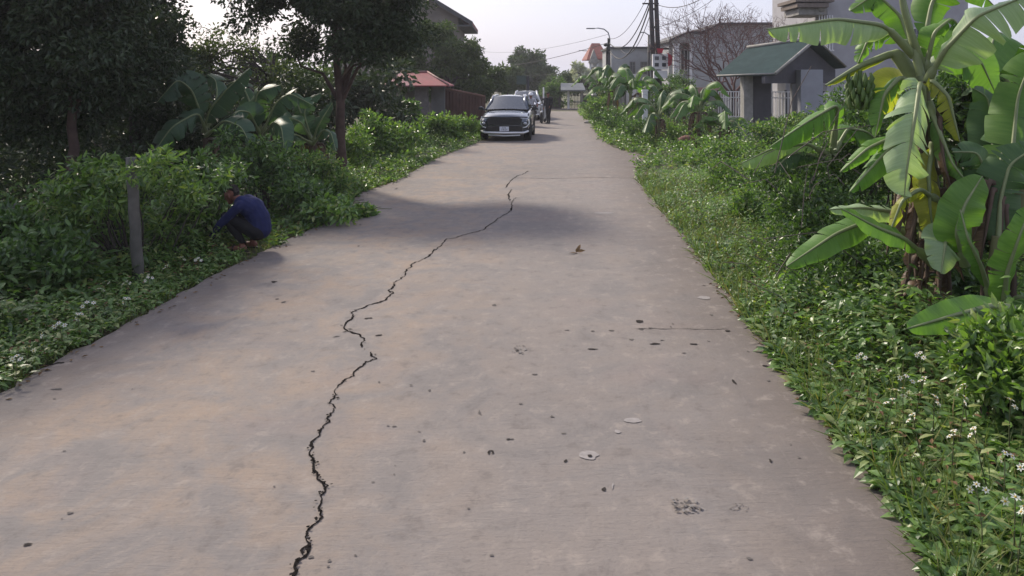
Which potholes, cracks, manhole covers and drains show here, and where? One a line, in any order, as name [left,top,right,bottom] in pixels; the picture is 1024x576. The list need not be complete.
crack [289,171,528,576]
pothole [671,497,703,513]
